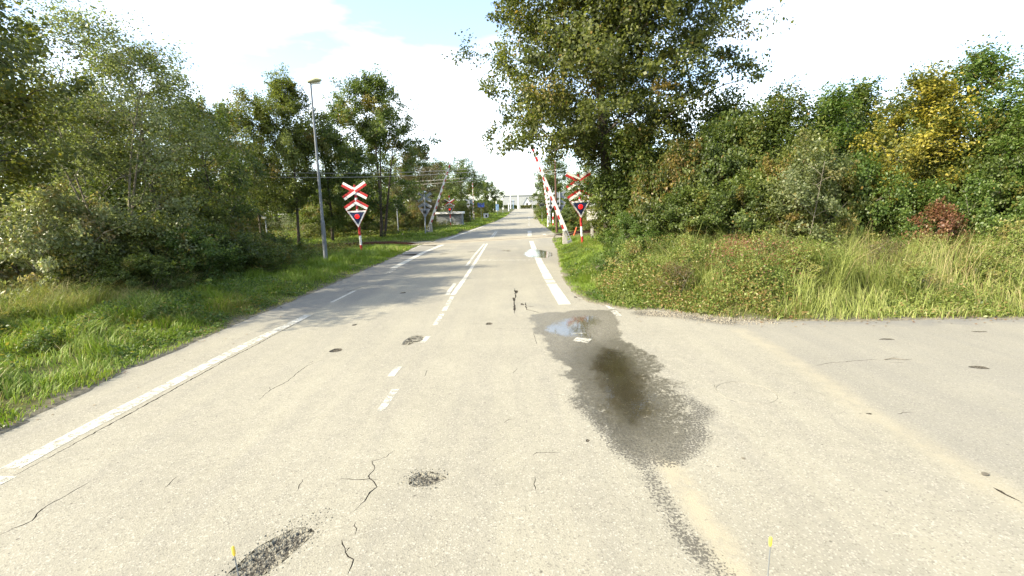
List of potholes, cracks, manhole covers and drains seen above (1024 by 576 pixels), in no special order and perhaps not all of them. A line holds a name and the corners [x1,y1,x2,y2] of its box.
pothole [398,468,450,491]
crack [15,482,89,528]
pothole [402,335,424,345]
crack [342,452,392,573]
pothole [214,507,334,576]
